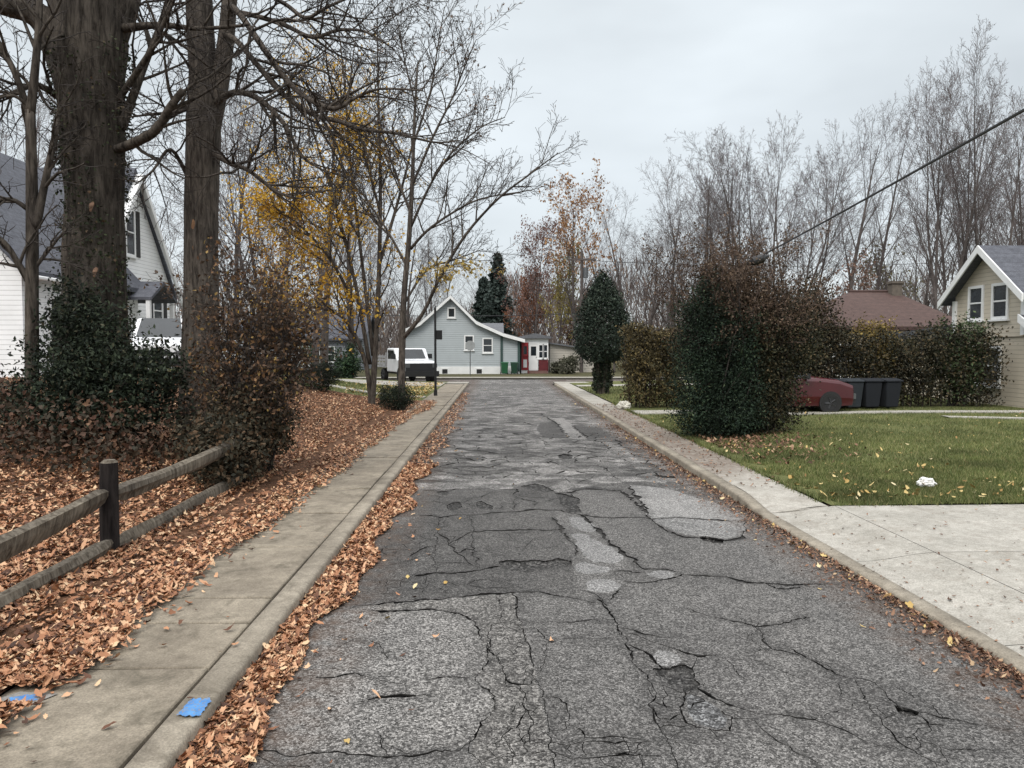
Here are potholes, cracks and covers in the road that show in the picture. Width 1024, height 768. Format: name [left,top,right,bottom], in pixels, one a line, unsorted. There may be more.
pothole [555,493,581,514]
pothole [653,664,700,693]
crack [257,414,1009,768]
pothole [498,558,572,572]
pothole [894,705,917,716]
